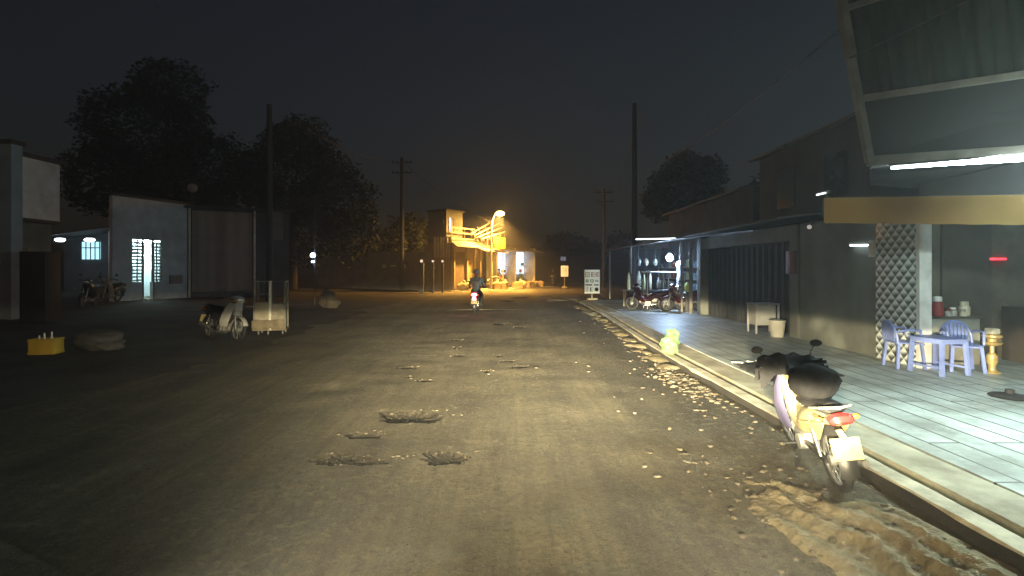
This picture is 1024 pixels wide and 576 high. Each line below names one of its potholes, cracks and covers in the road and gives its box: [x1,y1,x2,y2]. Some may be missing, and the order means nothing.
pothole [337,430,387,439]
pothole [407,446,479,468]
pothole [375,409,462,424]
pothole [309,452,405,466]
